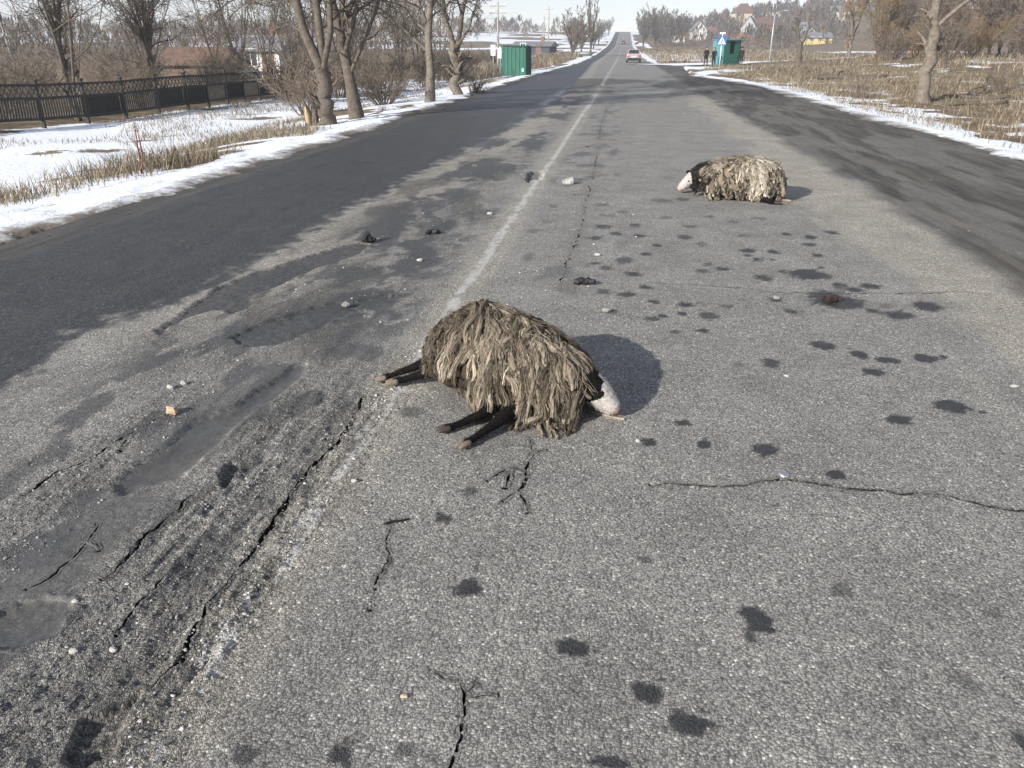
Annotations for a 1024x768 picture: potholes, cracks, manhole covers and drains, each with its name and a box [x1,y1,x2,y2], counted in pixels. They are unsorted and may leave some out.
crack [485,438,548,514]
crack [543,106,612,292]
crack [428,668,498,768]
crack [22,413,194,638]
crack [368,524,394,611]
crack [651,476,1024,514]
